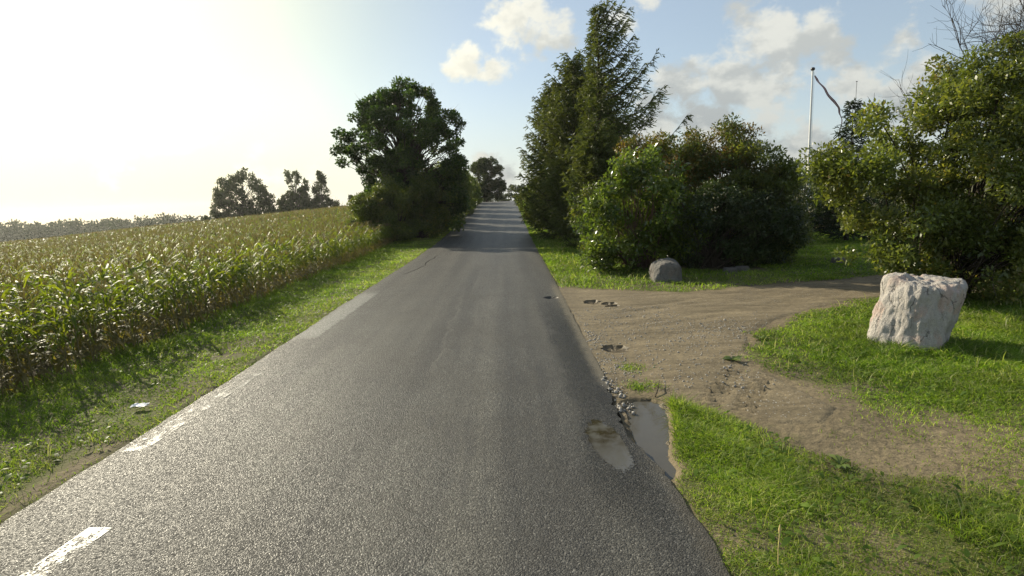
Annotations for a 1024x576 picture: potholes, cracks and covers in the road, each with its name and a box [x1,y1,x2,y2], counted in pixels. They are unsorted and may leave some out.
pothole [616,399,671,458]
